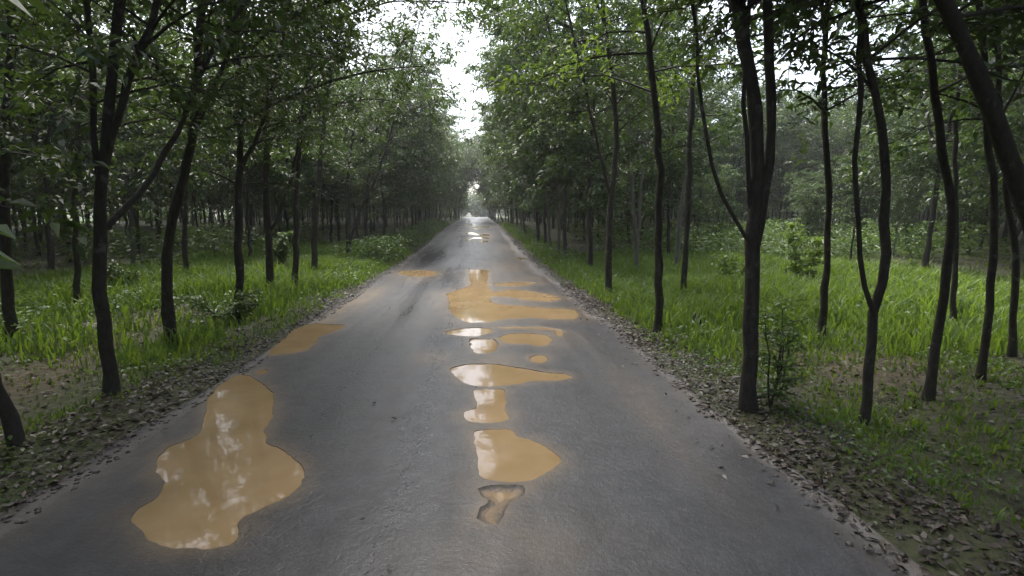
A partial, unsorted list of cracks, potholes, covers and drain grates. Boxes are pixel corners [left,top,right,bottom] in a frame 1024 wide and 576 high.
pothole [464,389,509,423]
pothole [498,333,553,346]
pothole [269,324,345,355]
pothole [130,374,305,549]
pothole [474,429,561,482]
pothole [529,355,548,363]
pothole [445,327,493,336]
pothole [450,364,572,386]
